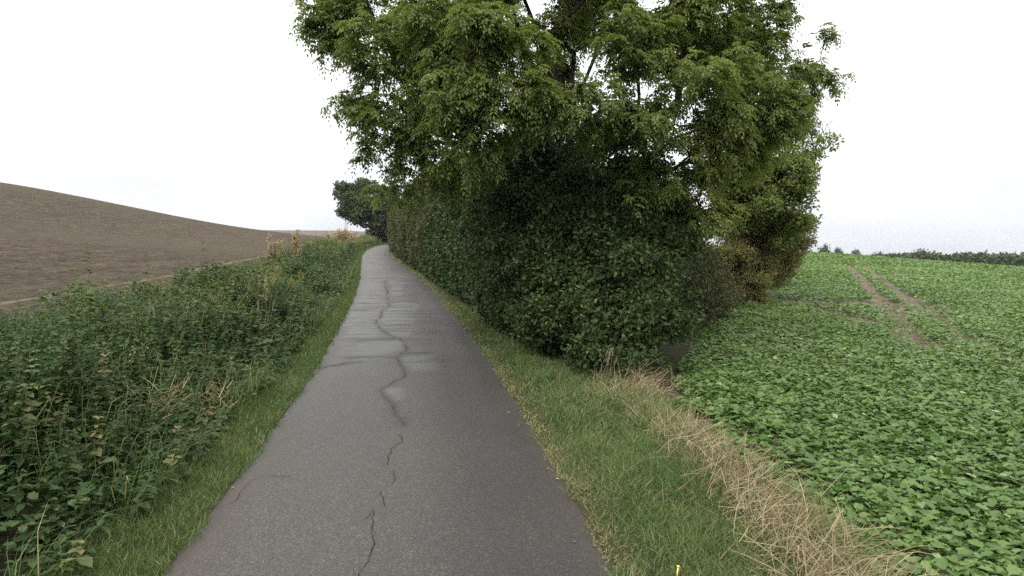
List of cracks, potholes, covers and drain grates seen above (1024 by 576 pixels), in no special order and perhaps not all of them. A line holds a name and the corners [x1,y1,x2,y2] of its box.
crack [358,435,402,576]
crack [360,278,411,422]
